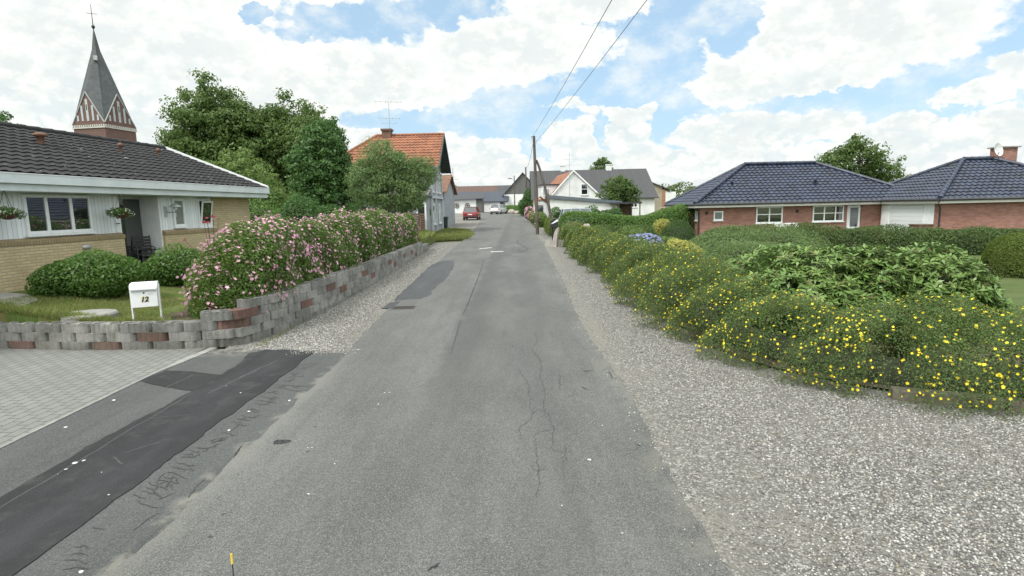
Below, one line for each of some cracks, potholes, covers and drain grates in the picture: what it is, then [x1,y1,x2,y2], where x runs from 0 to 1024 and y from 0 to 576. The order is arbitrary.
crack [517,334,573,501]
